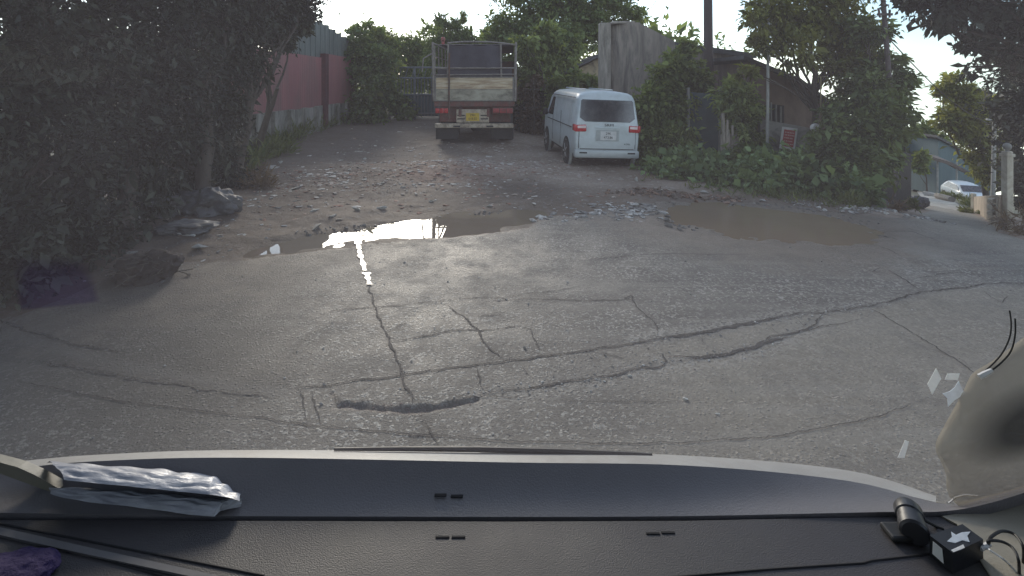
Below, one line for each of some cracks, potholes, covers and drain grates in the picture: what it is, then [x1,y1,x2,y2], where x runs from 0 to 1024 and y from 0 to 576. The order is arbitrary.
pothole [220,210,548,262]
pothole [327,390,490,416]
pothole [640,201,894,247]
crack [21,282,1008,444]
